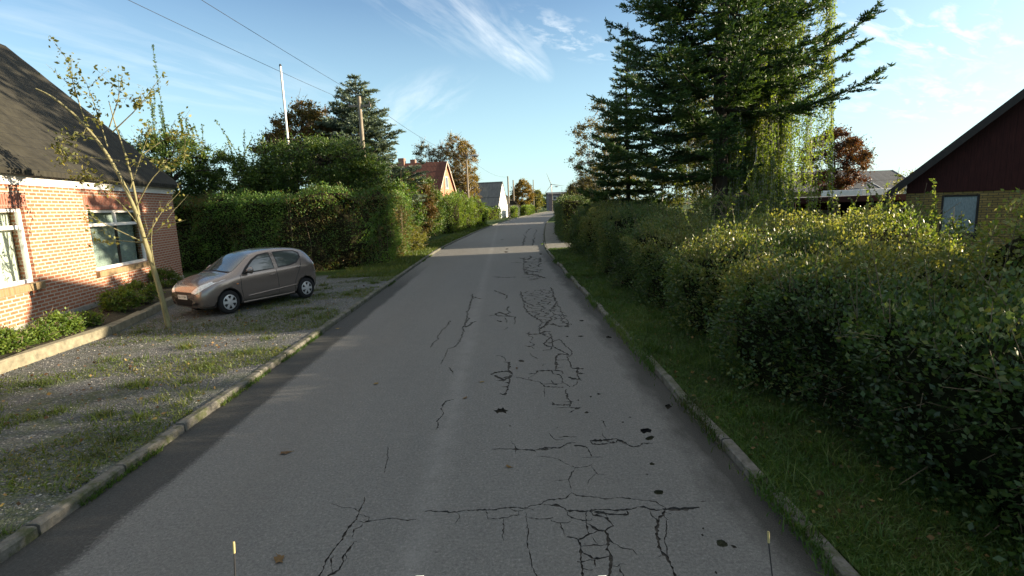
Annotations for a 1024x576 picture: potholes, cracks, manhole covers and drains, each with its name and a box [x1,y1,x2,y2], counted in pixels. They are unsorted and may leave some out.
crack [430,228,584,413]
crack [318,420,704,576]
